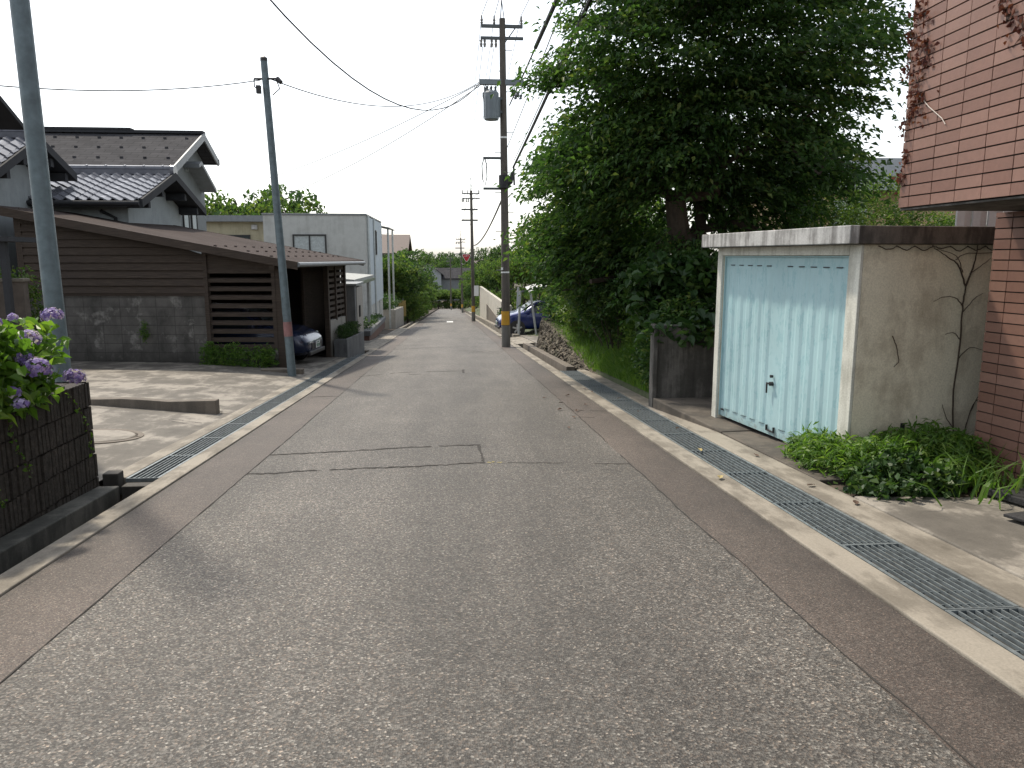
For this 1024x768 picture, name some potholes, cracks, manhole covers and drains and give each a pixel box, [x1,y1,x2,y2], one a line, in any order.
drain grate [227,412,267,424]
drain grate [621,409,669,420]
drain grate [126,455,196,482]
drain grate [248,402,284,412]
drain grate [170,437,226,455]
manhole cover [92,429,144,444]
drain grate [594,392,632,400]
drain grate [607,400,648,409]
drain grate [201,423,249,438]
drain grate [662,433,726,451]
drain grate [840,543,1020,610]
drain grate [689,450,767,473]
